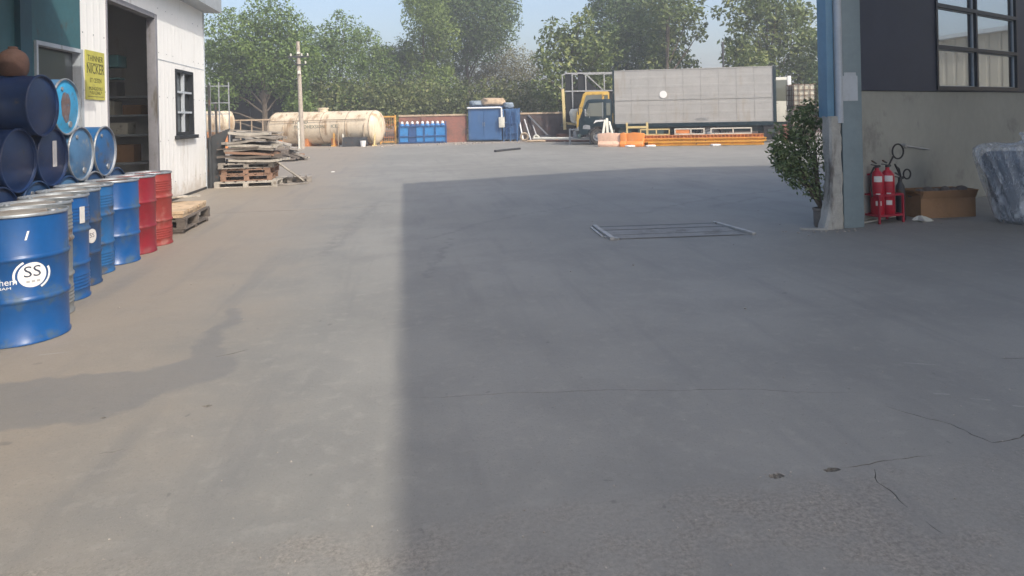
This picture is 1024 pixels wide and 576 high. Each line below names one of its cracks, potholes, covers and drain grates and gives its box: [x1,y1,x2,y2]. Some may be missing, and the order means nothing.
crack [898,410,1024,443]
